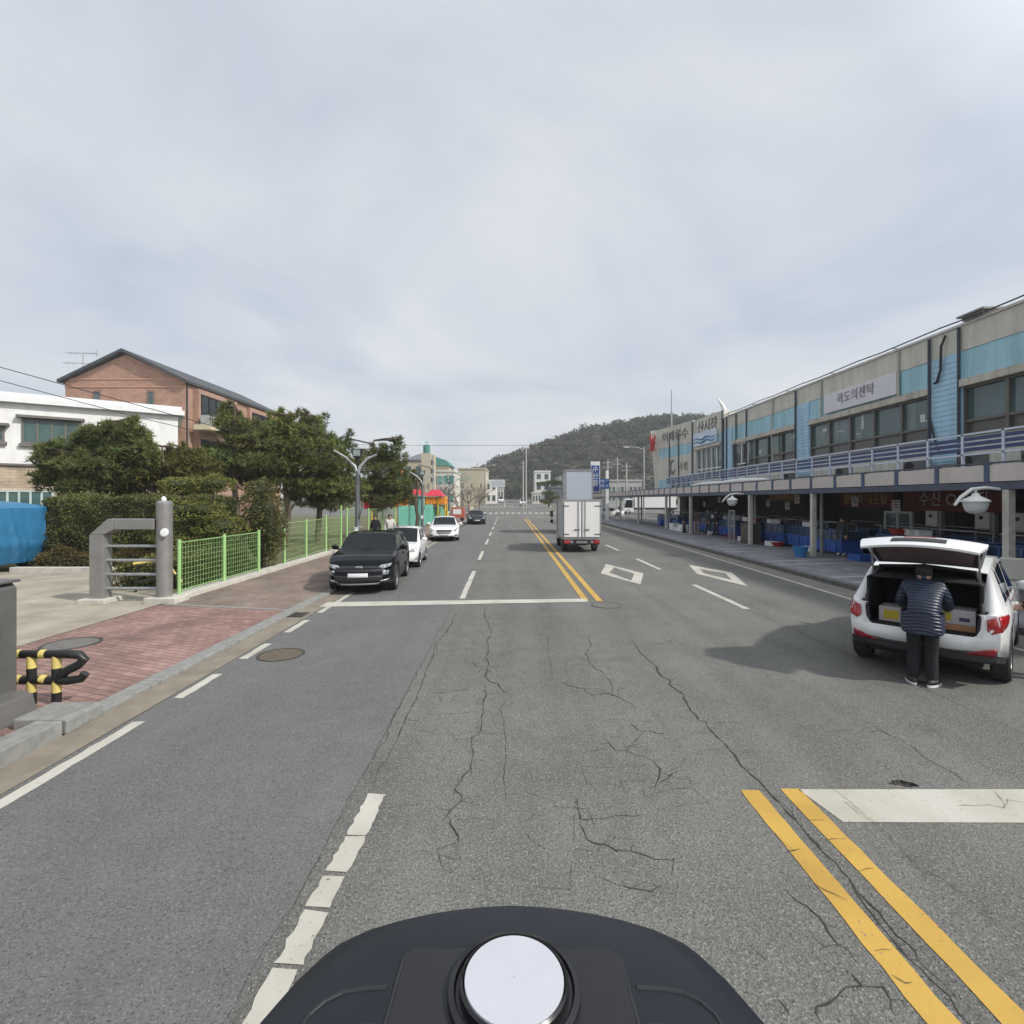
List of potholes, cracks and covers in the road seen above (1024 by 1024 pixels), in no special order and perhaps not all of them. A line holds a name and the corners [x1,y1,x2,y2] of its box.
manhole cover [256,648,305,662]
pothole [889,780,919,788]
crack [633,641,996,1024]
manhole cover [38,637,103,650]
crack [527,782,674,895]
crack [395,606,514,870]
crack [562,618,707,806]
